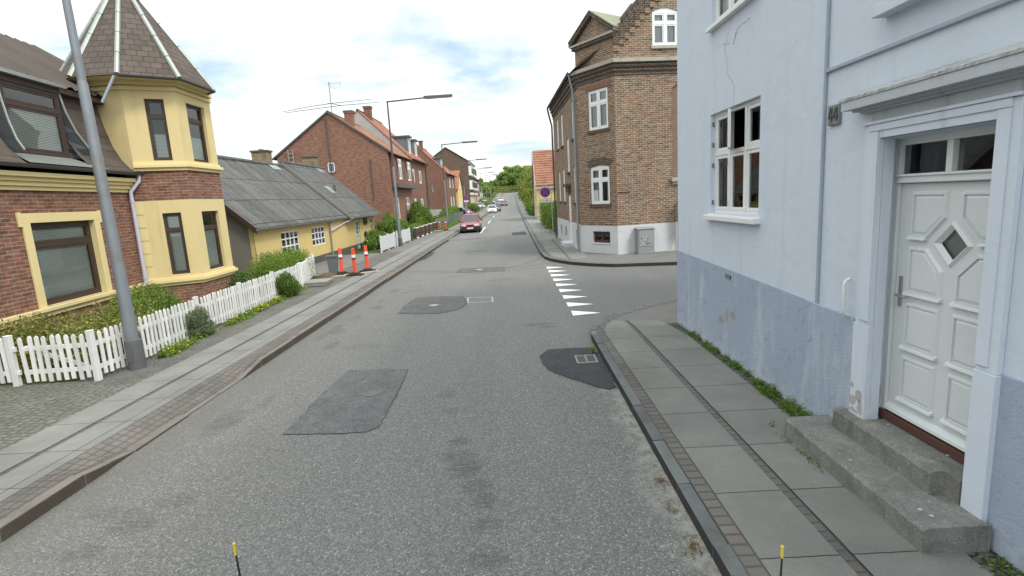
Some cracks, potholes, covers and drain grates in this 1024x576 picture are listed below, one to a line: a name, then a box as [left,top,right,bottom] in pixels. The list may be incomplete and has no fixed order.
manhole cover [362,389,381,397]
drain grate [574,354,599,364]
